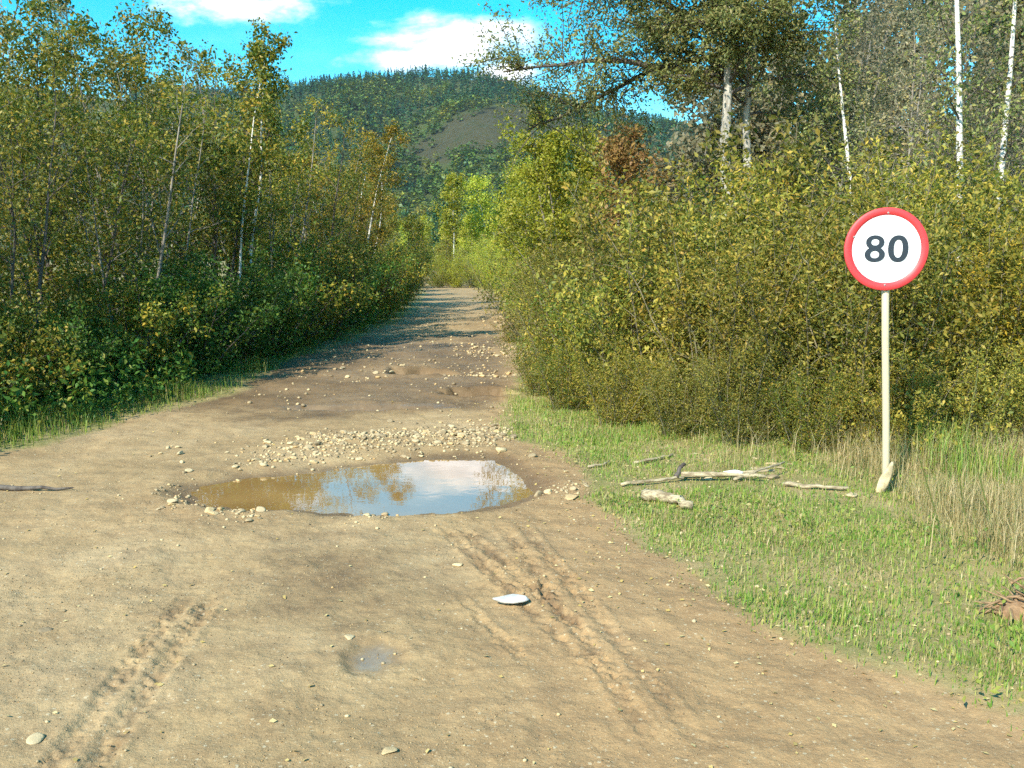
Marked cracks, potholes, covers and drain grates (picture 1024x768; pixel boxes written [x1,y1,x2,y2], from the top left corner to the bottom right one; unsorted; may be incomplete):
pothole [337,635,413,678]
pothole [431,386,523,397]
pothole [177,456,544,516]
